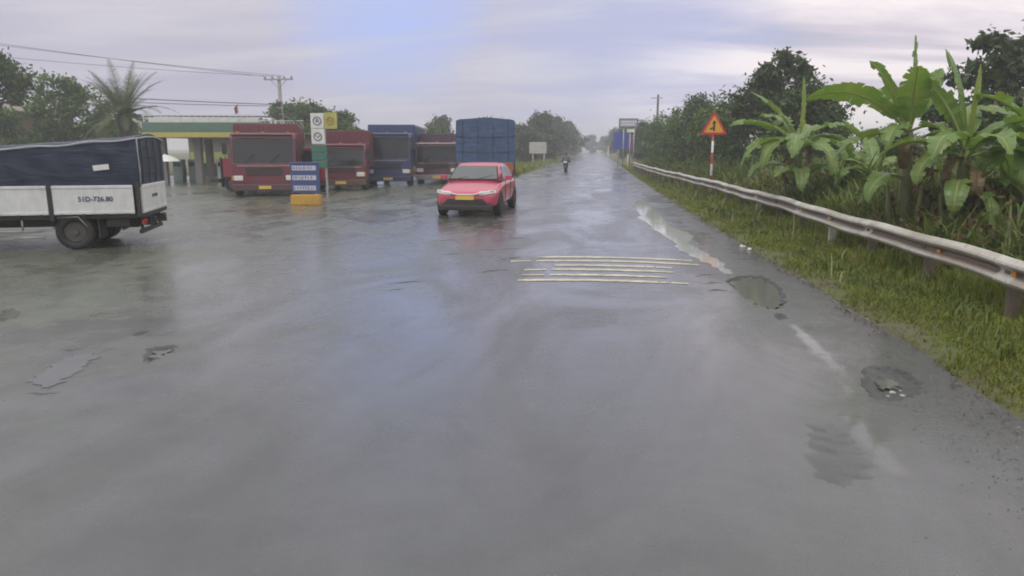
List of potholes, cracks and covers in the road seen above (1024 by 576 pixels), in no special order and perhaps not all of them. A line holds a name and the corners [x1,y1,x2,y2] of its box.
pothole [725,275,787,309]
pothole [860,365,923,402]
pothole [142,344,179,364]
